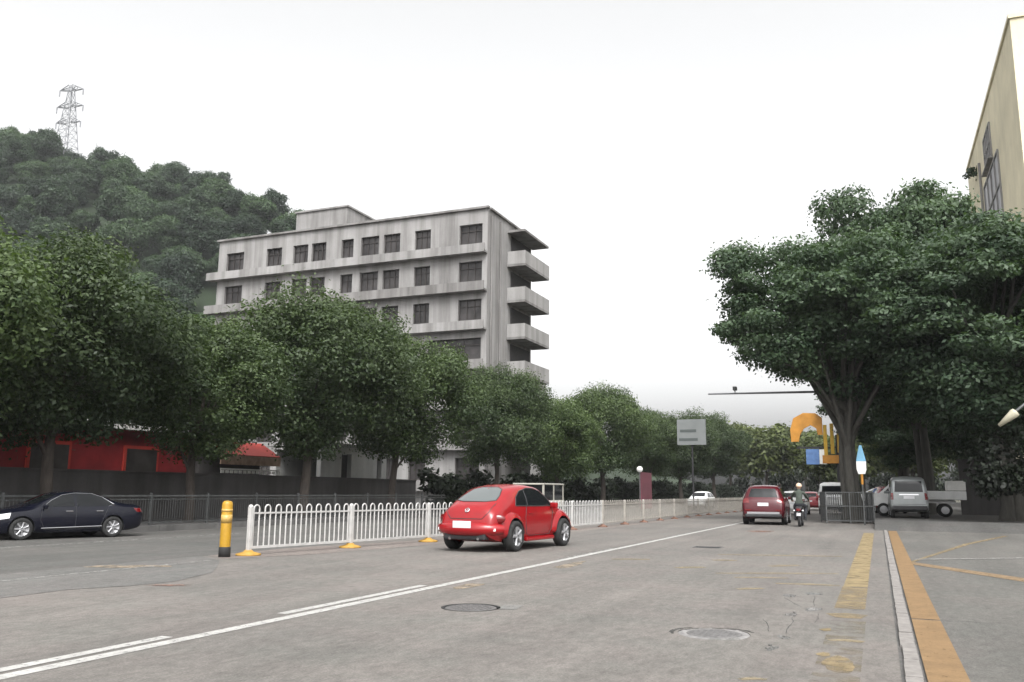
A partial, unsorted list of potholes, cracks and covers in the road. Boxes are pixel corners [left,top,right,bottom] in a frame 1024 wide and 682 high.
manhole cover [441,603,500,612]
manhole cover [678,628,750,640]
